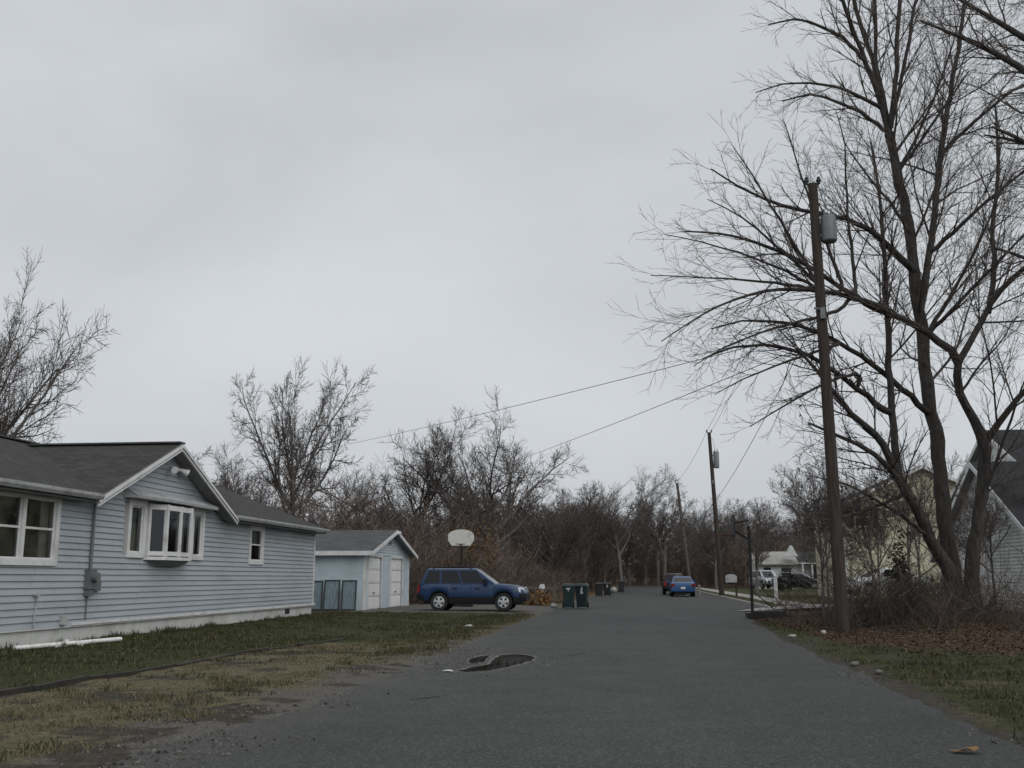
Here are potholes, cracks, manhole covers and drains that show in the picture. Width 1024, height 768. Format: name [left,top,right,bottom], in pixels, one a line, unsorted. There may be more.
pothole [455,654,538,673]
